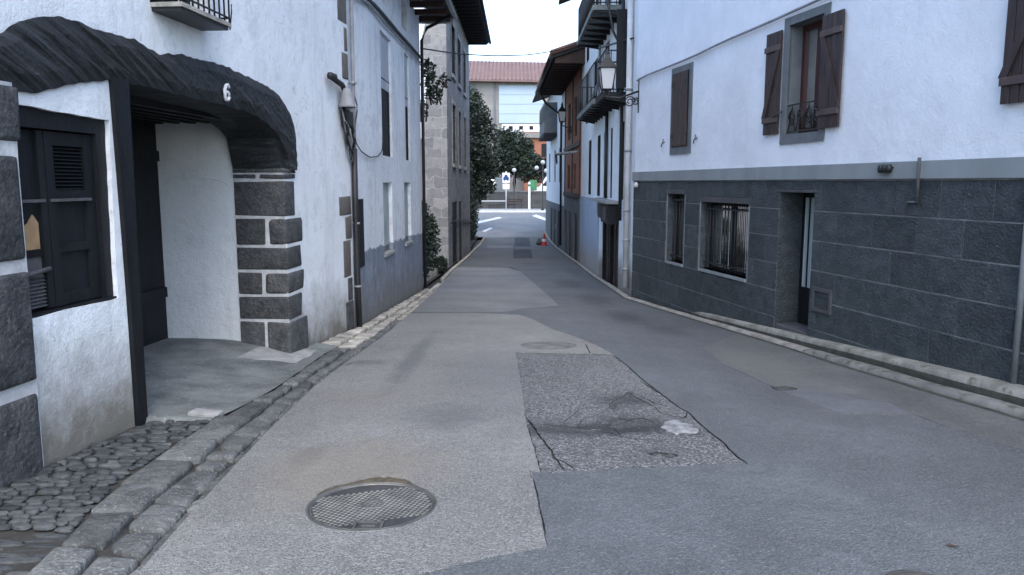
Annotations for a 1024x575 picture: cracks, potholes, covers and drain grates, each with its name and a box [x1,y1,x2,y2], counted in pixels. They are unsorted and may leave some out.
pothole [609,392,646,410]
manhole cover [305,482,437,532]
manhole cover [521,341,577,353]
crack [526,383,686,544]
